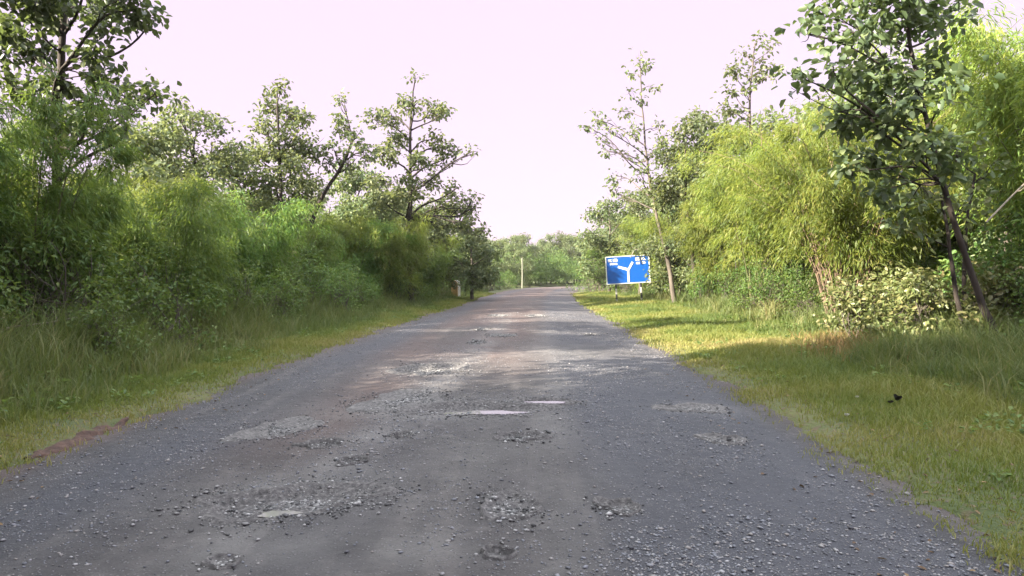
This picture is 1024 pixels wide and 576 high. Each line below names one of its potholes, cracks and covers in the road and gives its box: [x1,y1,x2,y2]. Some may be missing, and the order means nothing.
pothole [206,412,341,450]
pothole [690,431,766,450]
pothole [362,358,505,380]
pothole [323,454,377,467]
pothole [479,540,518,562]
pothole [476,427,560,447]
pothole [366,394,600,422]
pothole [382,429,420,439]
pothole [283,437,359,452]
pothole [465,481,559,534]
pothole [192,553,248,571]
pothole [639,400,739,417]
